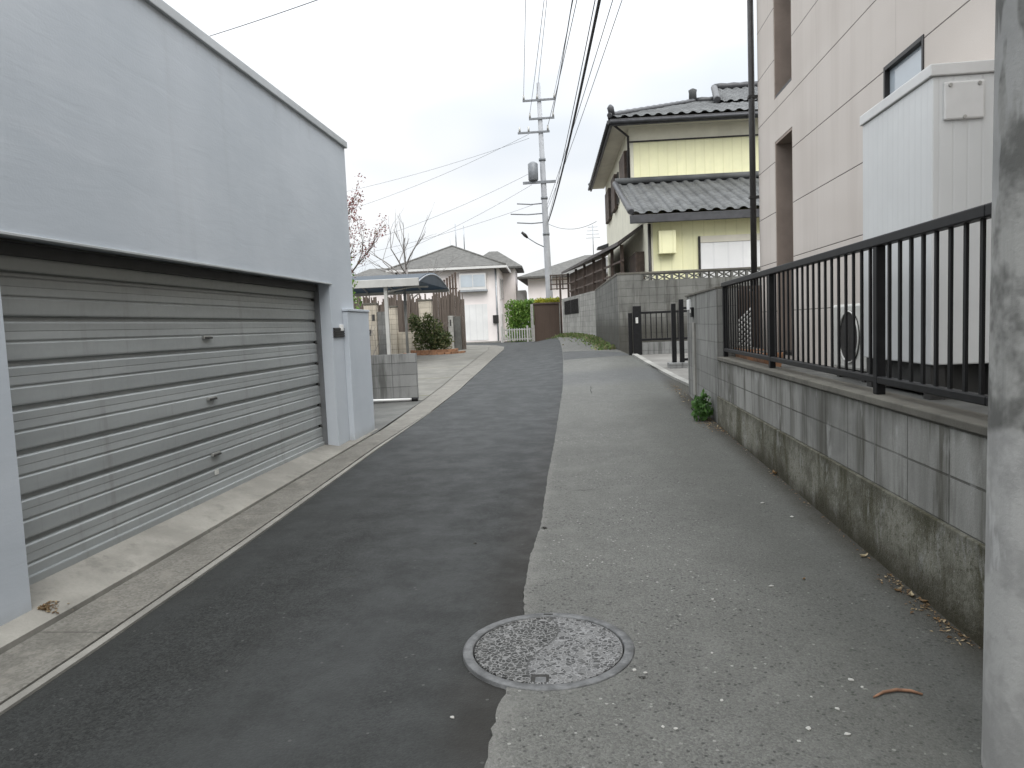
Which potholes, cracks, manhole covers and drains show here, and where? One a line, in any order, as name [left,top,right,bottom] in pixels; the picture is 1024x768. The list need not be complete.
manhole cover [463,613,635,691]
